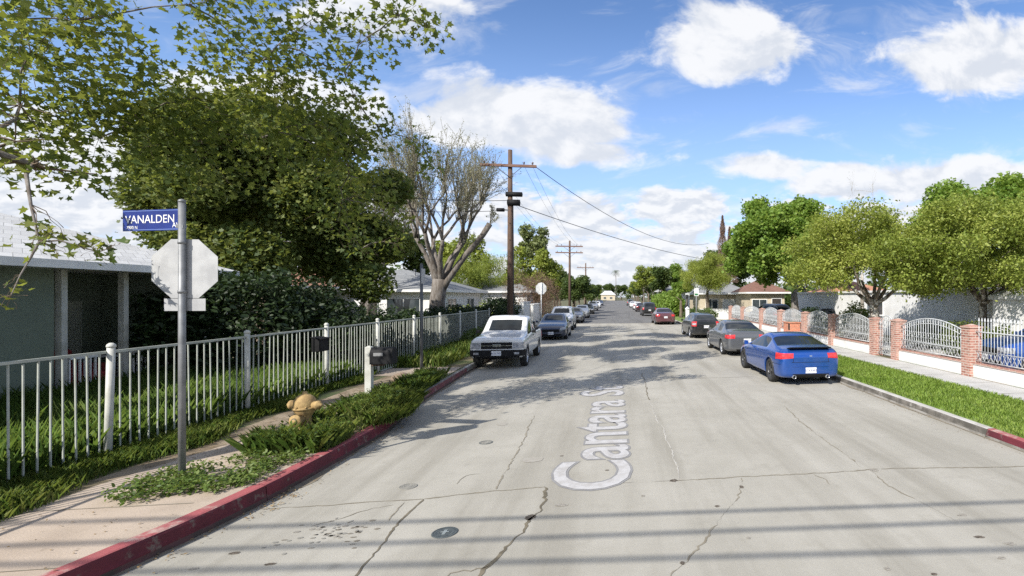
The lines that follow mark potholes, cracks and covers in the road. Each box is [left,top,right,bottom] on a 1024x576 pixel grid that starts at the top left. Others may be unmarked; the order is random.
crack [313,499,424,576]
crack [787,409,956,521]
crack [670,478,743,576]
manhole cover [431,527,458,538]
crack [447,487,548,576]
